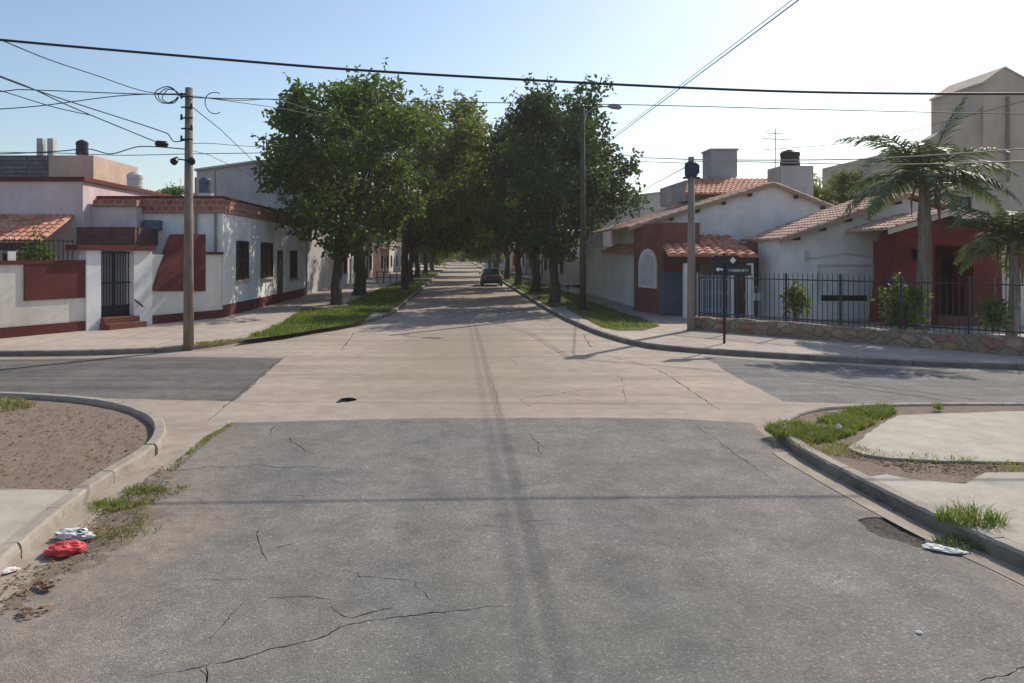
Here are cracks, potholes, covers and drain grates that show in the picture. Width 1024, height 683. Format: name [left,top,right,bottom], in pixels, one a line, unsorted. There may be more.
crack [978,667,1024,682]
crack [133,571,508,683]
crack [173,427,340,496]
crack [508,335,719,409]
pothole [858,517,927,548]
